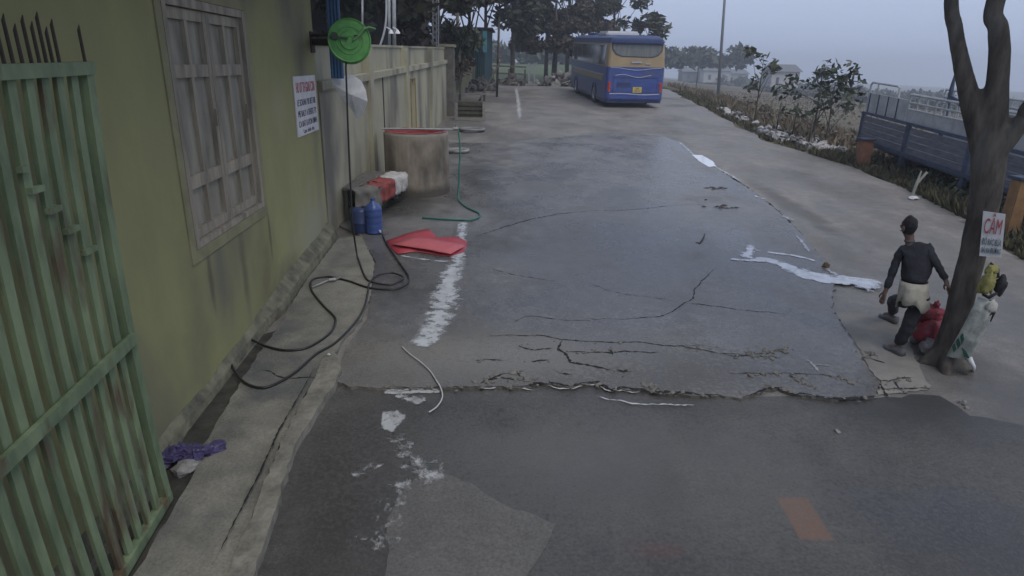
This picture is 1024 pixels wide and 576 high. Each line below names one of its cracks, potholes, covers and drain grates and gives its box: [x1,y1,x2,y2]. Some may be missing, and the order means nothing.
crack [478,204,708,236]
crack [382,269,927,402]
